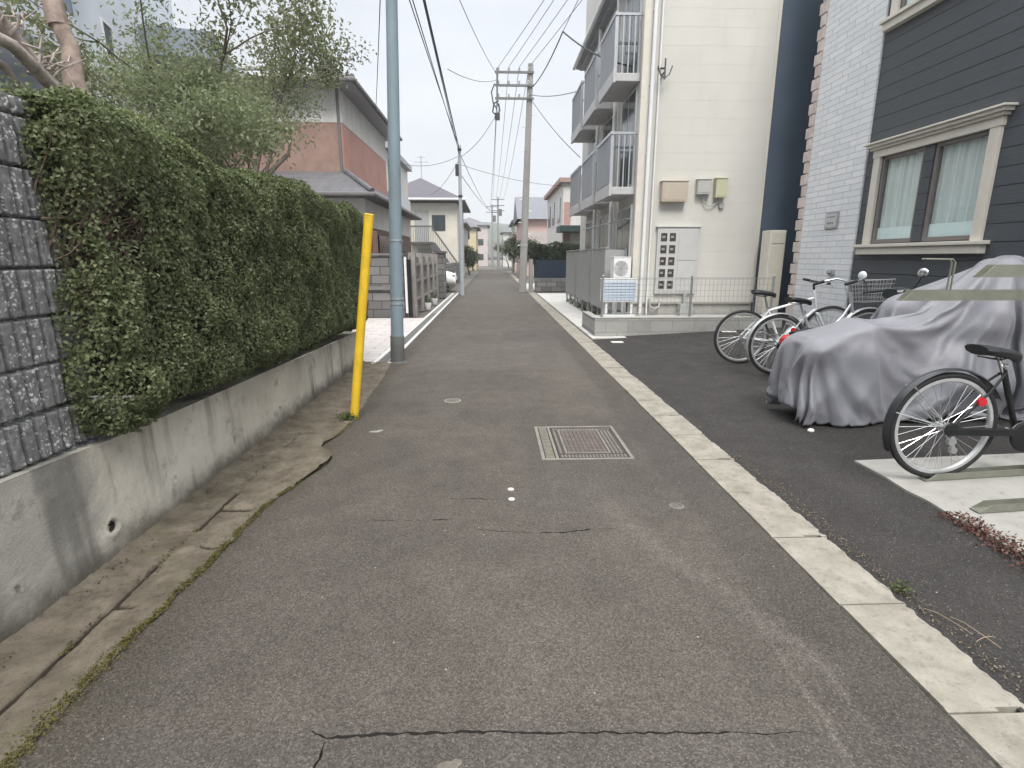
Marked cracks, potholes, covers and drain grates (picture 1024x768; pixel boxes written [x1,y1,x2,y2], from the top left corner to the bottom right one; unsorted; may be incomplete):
manhole cover [534,426,635,460]
crack [311,730,817,768]
crack [371,519,611,533]
